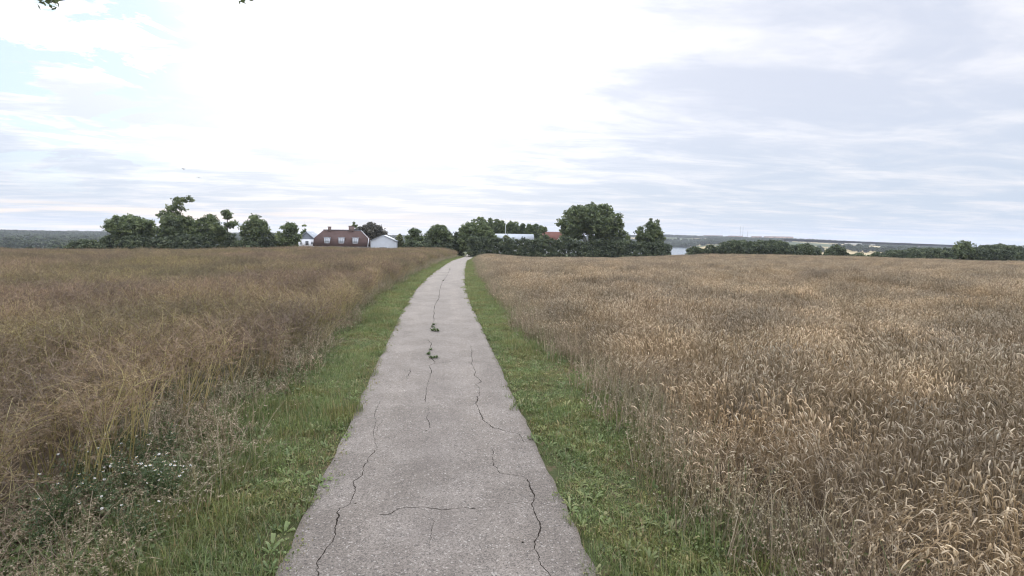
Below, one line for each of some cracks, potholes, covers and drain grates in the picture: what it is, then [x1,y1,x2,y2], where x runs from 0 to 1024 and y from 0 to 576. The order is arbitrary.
crack [471,346,524,442]
crack [316,385,391,576]
crack [380,507,475,543]
crack [492,451,551,576]
